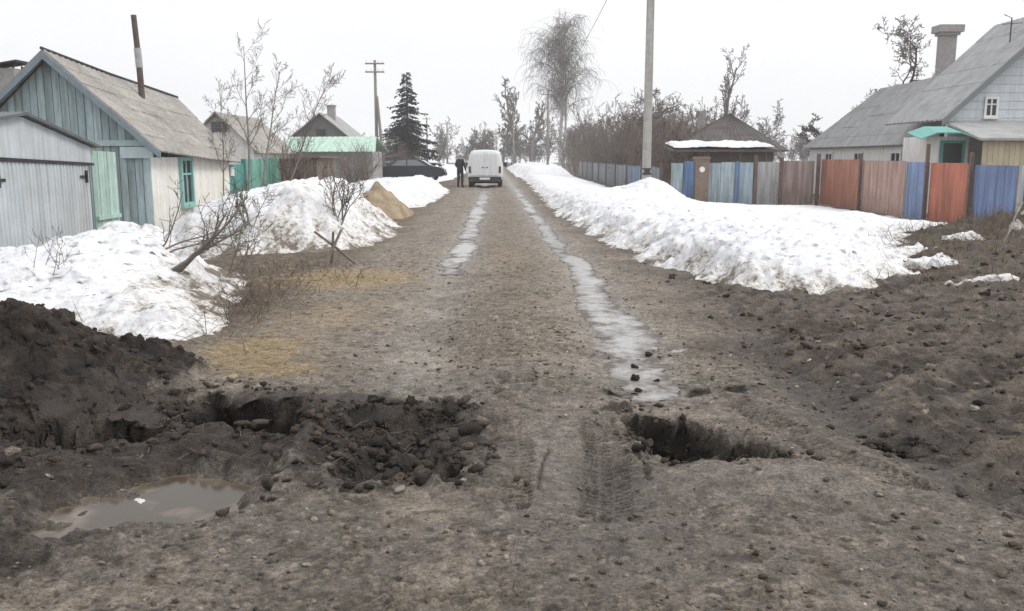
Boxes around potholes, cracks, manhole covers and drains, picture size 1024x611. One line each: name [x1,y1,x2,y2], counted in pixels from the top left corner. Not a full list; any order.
pothole [619,409,814,467]
pothole [323,399,495,501]
pothole [162,384,316,437]
